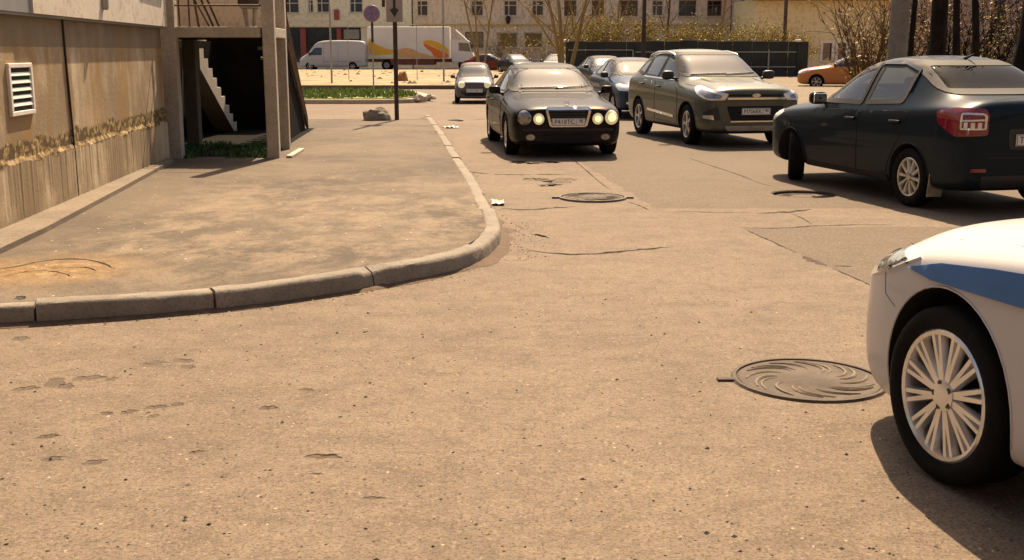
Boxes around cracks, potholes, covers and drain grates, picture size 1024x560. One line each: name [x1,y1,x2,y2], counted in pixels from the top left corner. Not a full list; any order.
pothole [100,402,184,418]
crack [0,258,115,277]
pothole [140,358,196,370]
pothole [11,375,118,391]
pothole [523,178,577,187]
manhole cover [552,192,634,203]
crack [527,247,667,255]
manhole cover [717,358,886,404]
